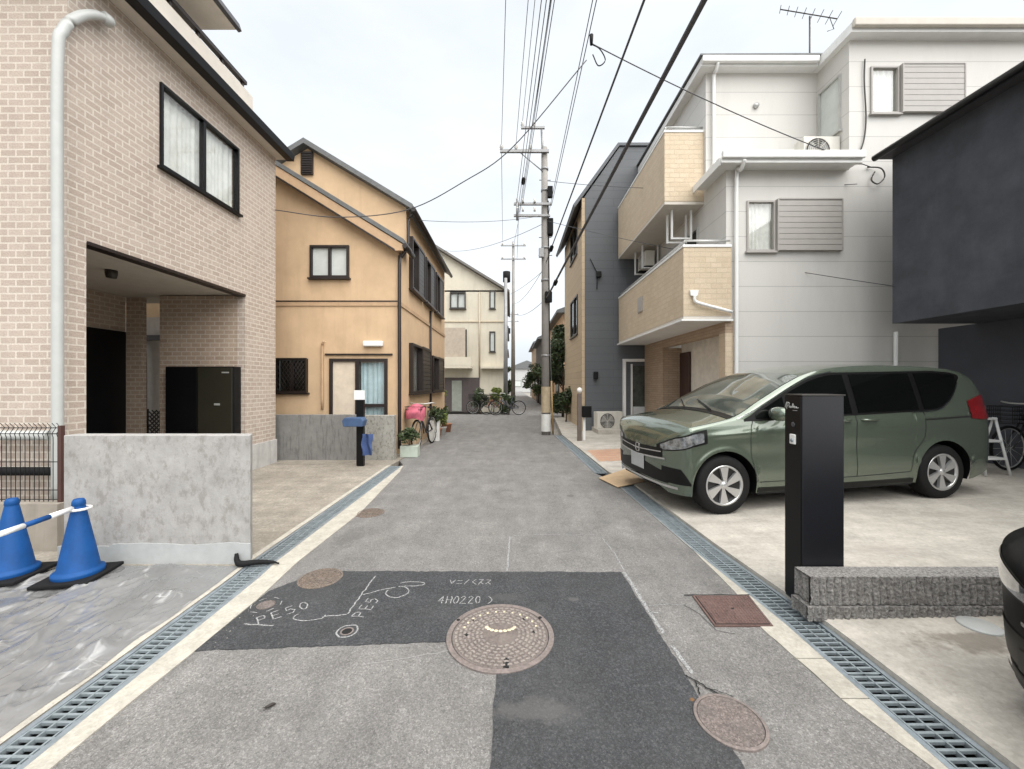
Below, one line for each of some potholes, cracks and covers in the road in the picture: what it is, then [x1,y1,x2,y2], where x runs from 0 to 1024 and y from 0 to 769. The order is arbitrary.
manhole cover [693,693,770,753]
manhole cover [297,568,343,589]
crack [686,675,734,697]
manhole cover [356,508,385,518]
utility cover [692,595,773,627]
manhole cover [446,604,554,675]
manhole cover [256,600,276,610]
